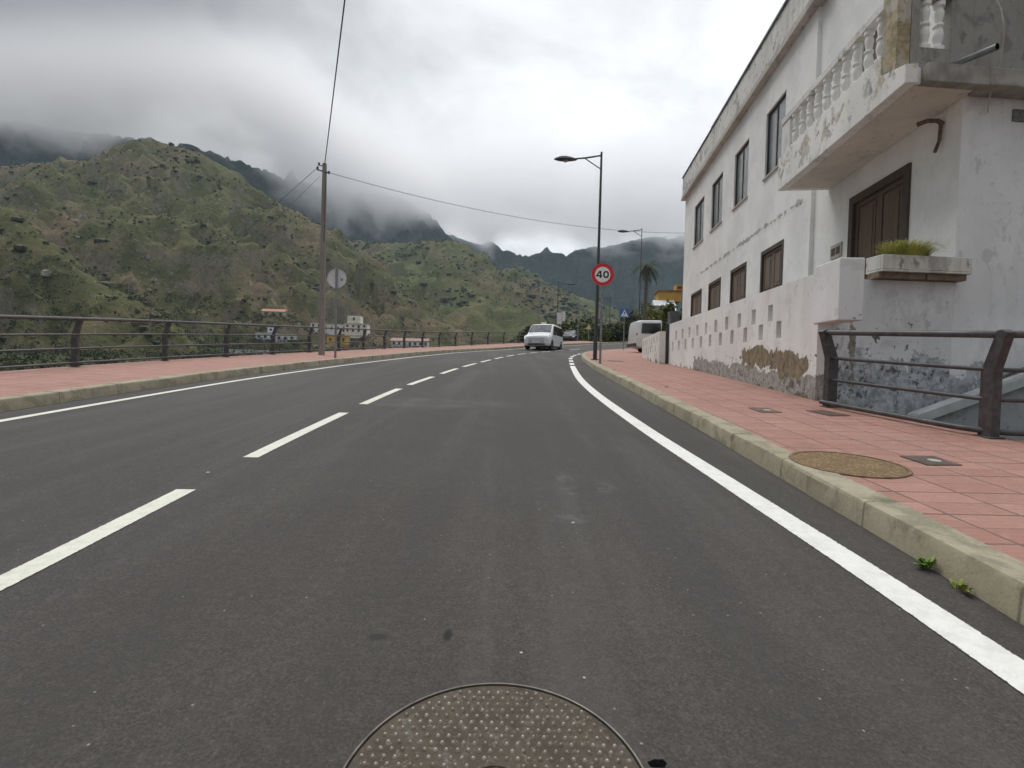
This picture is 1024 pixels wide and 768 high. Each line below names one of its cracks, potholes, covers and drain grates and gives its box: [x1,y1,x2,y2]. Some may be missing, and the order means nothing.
manhole cover [343,683,644,768]
manhole cover [788,451,913,479]
utility cover [900,456,961,465]
